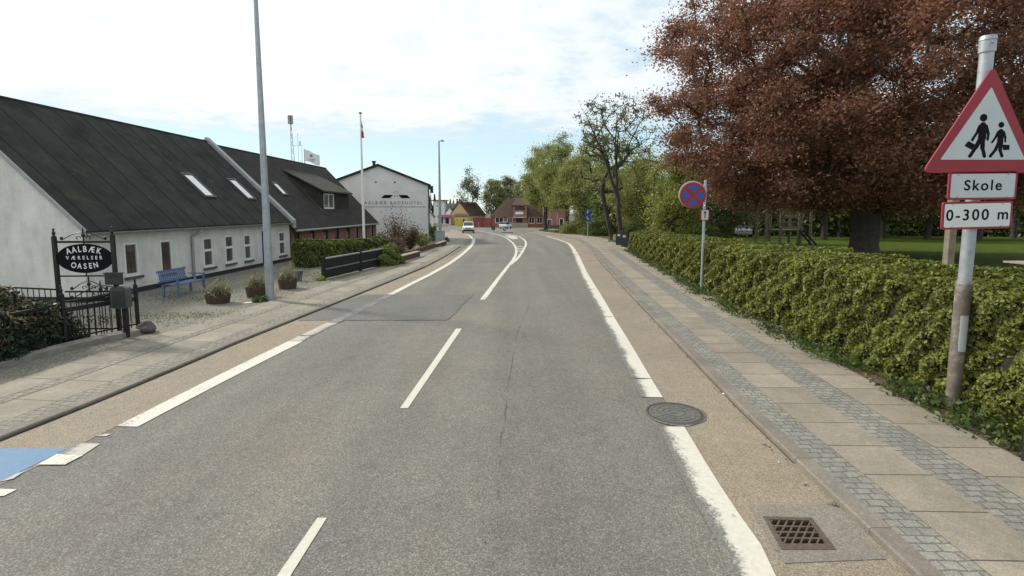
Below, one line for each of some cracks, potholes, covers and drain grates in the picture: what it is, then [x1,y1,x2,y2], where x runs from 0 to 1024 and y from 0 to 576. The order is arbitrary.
drain grate [763,516,836,550]
manhole cover [643,402,706,426]
crack [485,299,530,543]
